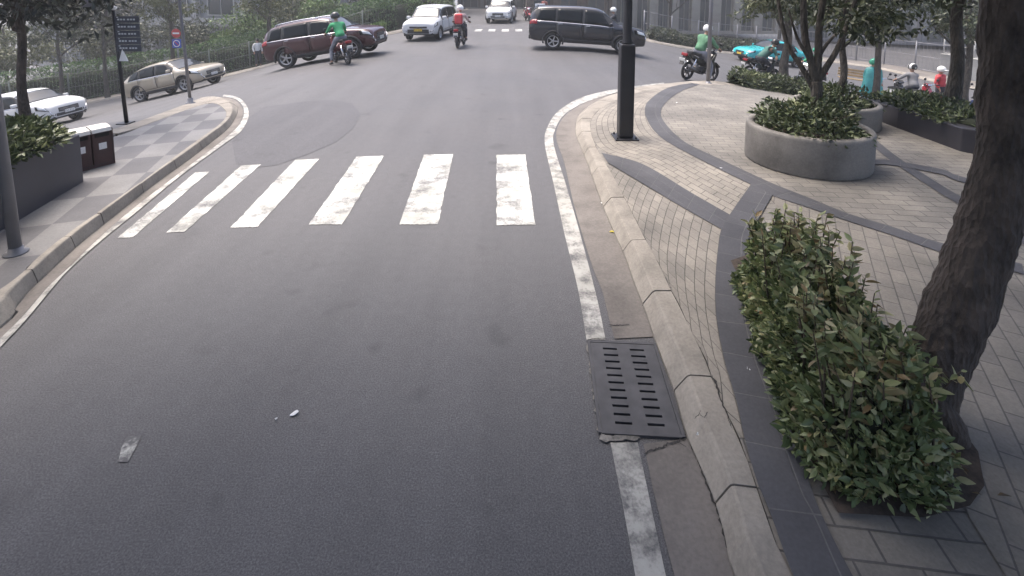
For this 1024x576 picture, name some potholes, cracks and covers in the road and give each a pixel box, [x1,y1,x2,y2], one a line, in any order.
drain grate [586,340,686,442]
crack [644,375,732,548]
